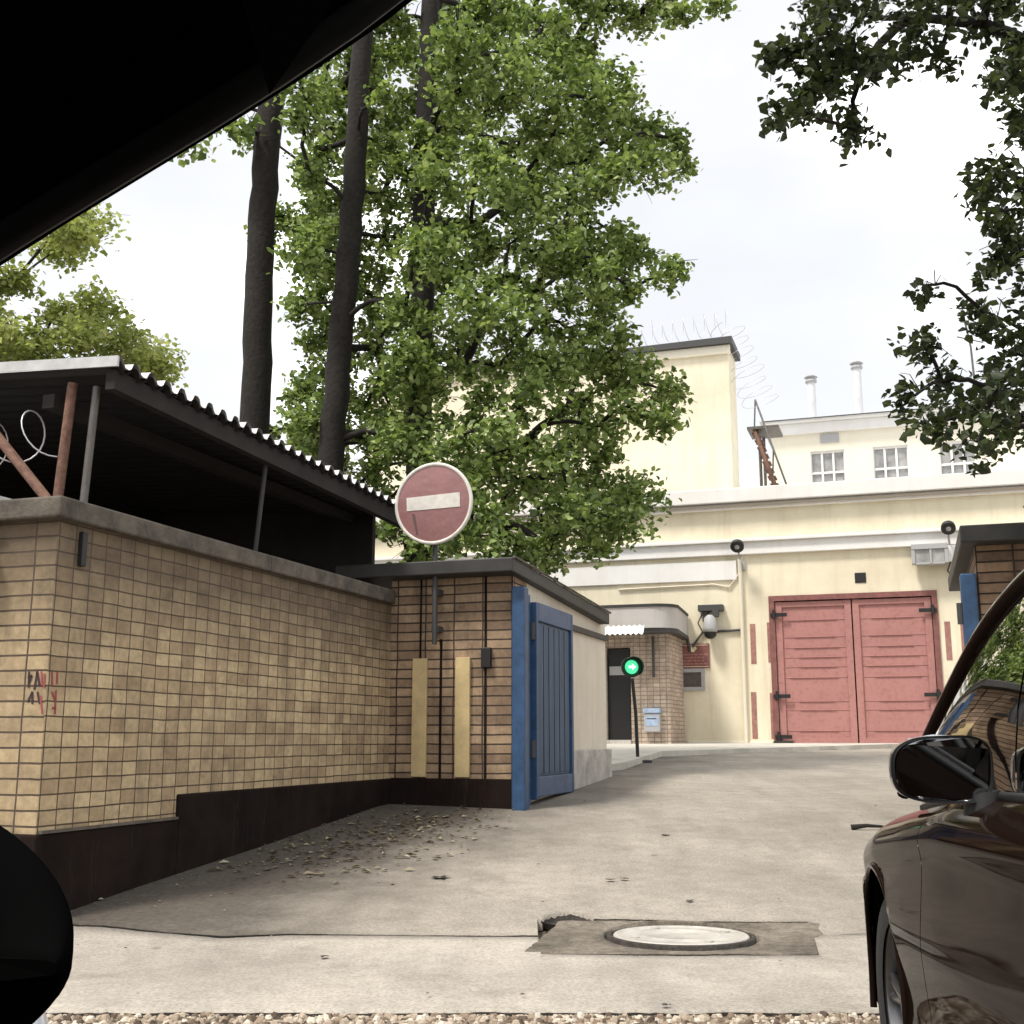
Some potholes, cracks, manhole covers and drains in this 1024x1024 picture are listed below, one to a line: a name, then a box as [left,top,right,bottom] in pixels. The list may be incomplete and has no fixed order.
manhole cover [607,925,757,951]
pothole [541,914,592,930]
